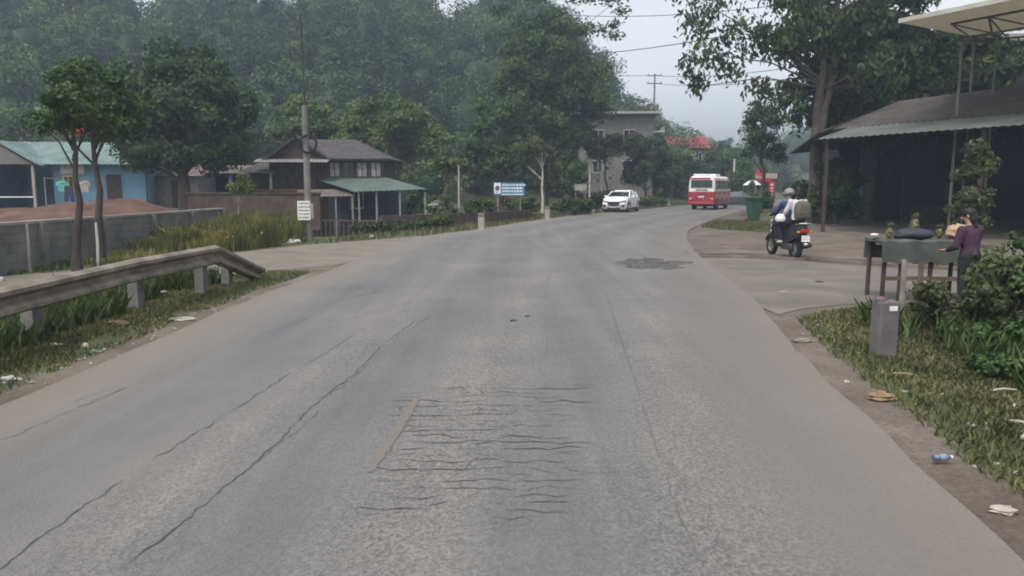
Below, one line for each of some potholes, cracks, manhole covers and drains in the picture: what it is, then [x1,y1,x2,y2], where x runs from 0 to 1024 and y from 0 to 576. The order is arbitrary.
crack [122,289,430,569]
crack [605,290,703,565]
crack [0,374,289,569]
